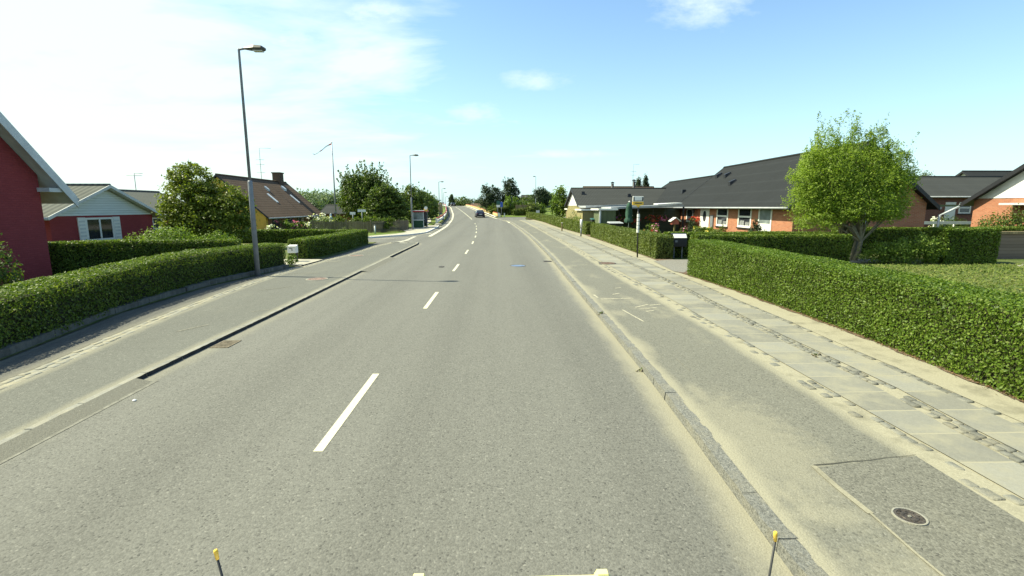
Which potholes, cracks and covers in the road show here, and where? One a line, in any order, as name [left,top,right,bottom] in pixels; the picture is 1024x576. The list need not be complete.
manhole cover [891,507,929,526]
